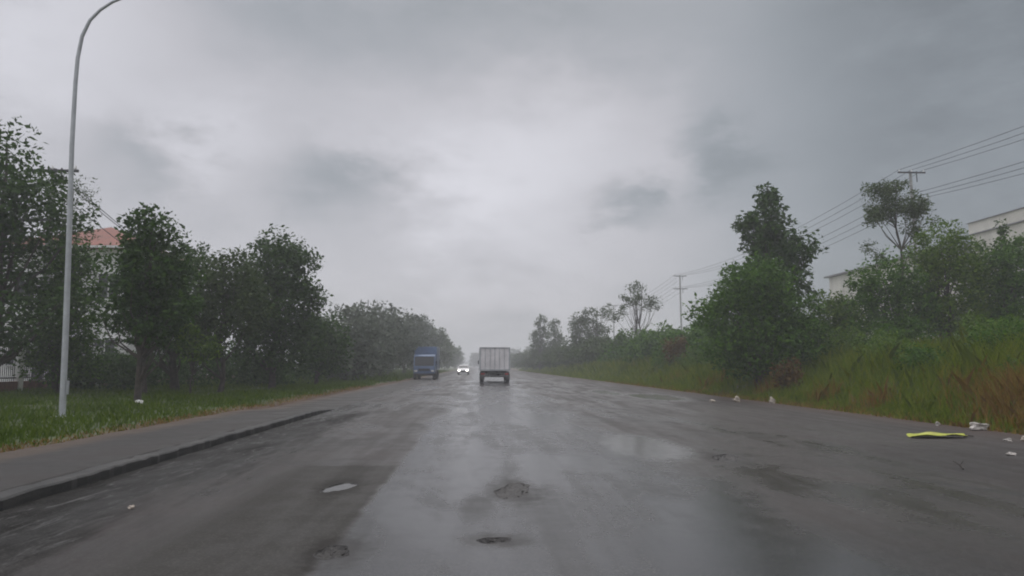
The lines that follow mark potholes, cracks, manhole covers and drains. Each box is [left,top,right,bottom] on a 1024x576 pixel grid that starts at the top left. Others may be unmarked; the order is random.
pothole [313,545,350,560]
pothole [493,482,530,499]
pothole [712,454,738,462]
